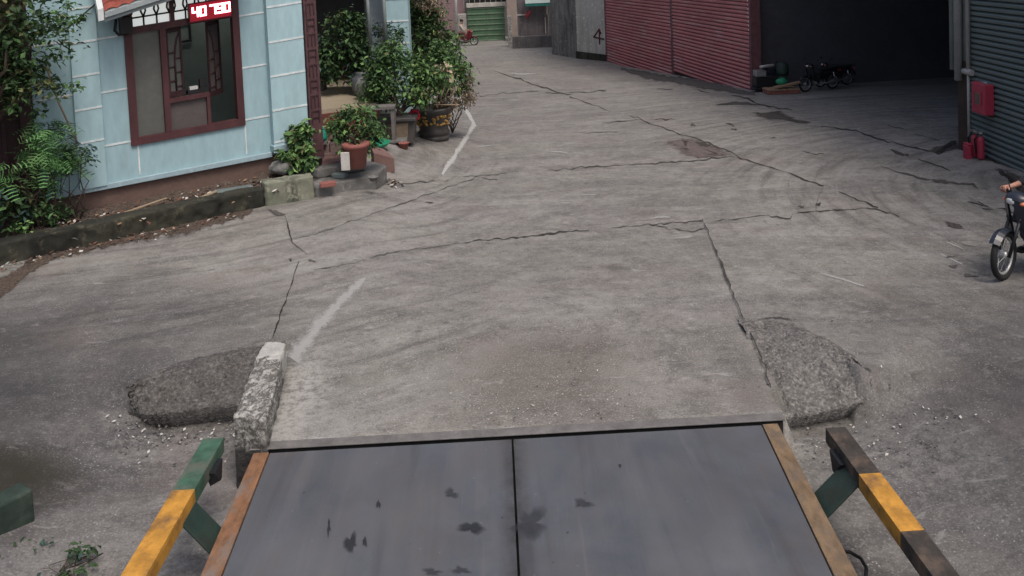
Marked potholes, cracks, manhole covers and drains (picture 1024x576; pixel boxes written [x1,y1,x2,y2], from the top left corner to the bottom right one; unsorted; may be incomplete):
crack [273,217,588,336]
crack [821,125,950,171]
crack [473,71,899,232]
